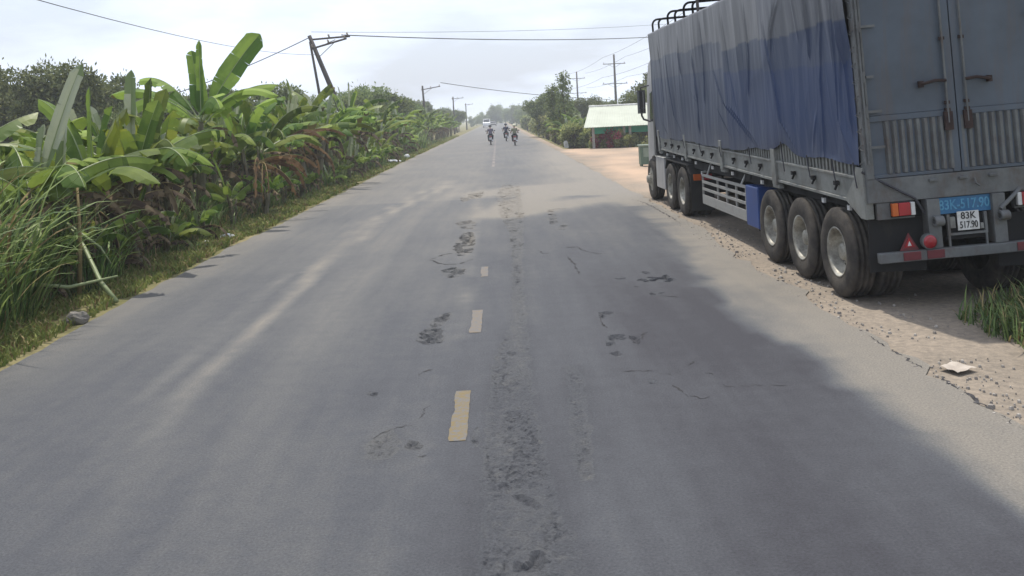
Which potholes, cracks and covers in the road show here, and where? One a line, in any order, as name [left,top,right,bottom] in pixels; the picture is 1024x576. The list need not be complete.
pothole [452,232,476,256]
crack [431,184,647,576]
crack [871,336,1021,428]
pothole [415,312,453,345]
crack [631,361,783,398]
pothole [637,274,678,282]
pothole [440,267,466,279]
crack [364,406,429,460]
pothole [605,331,627,346]
